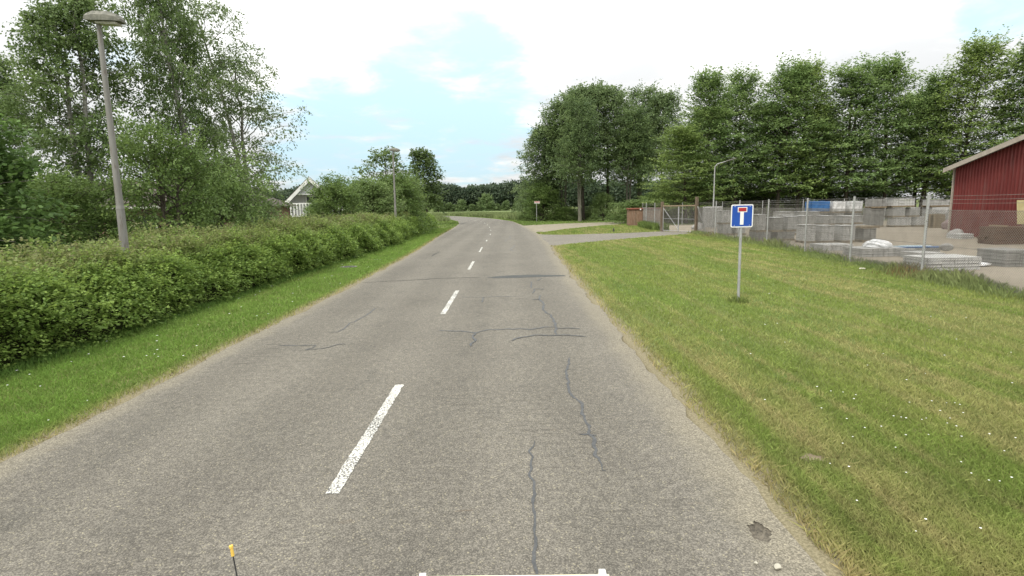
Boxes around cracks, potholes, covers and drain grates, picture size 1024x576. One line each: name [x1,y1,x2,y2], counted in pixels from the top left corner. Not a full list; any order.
pothole [747,521,772,543]
